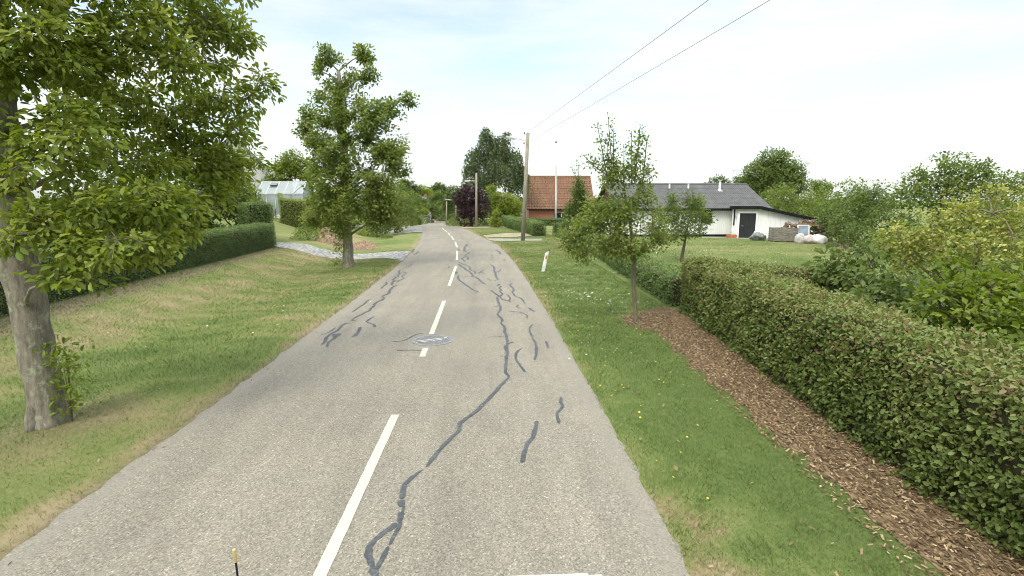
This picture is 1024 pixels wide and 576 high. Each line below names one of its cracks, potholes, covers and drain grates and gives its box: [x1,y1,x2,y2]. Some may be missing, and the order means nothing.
manhole cover [412,335,453,346]
